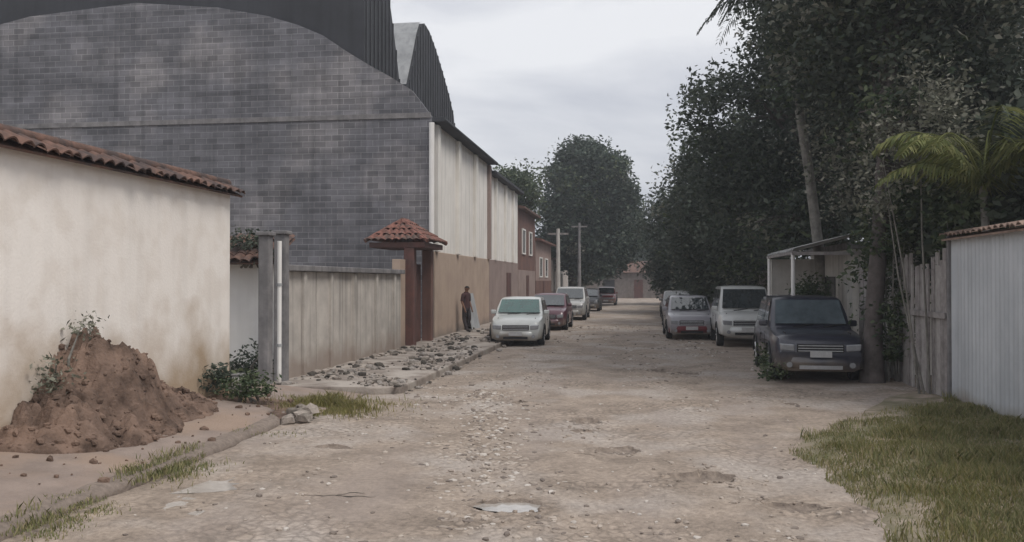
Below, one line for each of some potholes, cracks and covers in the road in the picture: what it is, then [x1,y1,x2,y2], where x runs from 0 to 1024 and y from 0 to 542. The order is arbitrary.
pothole [659,469,742,486]
pothole [751,500,845,517]
pothole [452,496,558,516]
pothole [586,444,647,457]
pothole [302,443,362,451]
